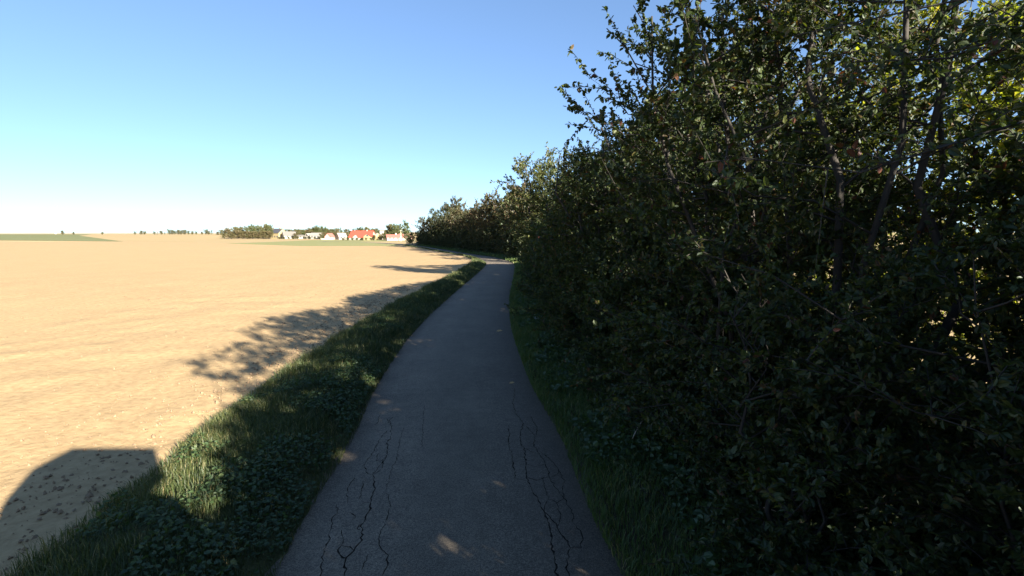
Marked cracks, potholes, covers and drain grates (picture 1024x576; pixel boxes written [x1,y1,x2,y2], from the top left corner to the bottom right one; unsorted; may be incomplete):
crack [508,388,583,576]
crack [320,415,404,576]
